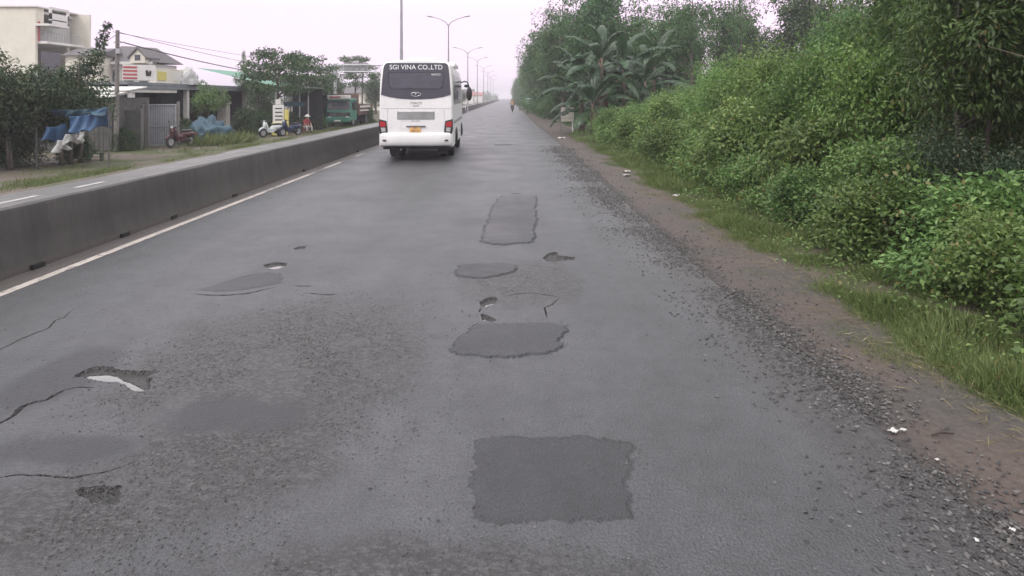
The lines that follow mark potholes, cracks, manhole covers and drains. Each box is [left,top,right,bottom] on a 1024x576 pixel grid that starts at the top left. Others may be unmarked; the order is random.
pothole [543,252,576,262]
pothole [72,485,122,505]
pothole [480,297,497,307]
pothole [74,366,158,392]
crack [0,387,94,424]
crack [0,458,139,479]
crack [0,307,76,350]
